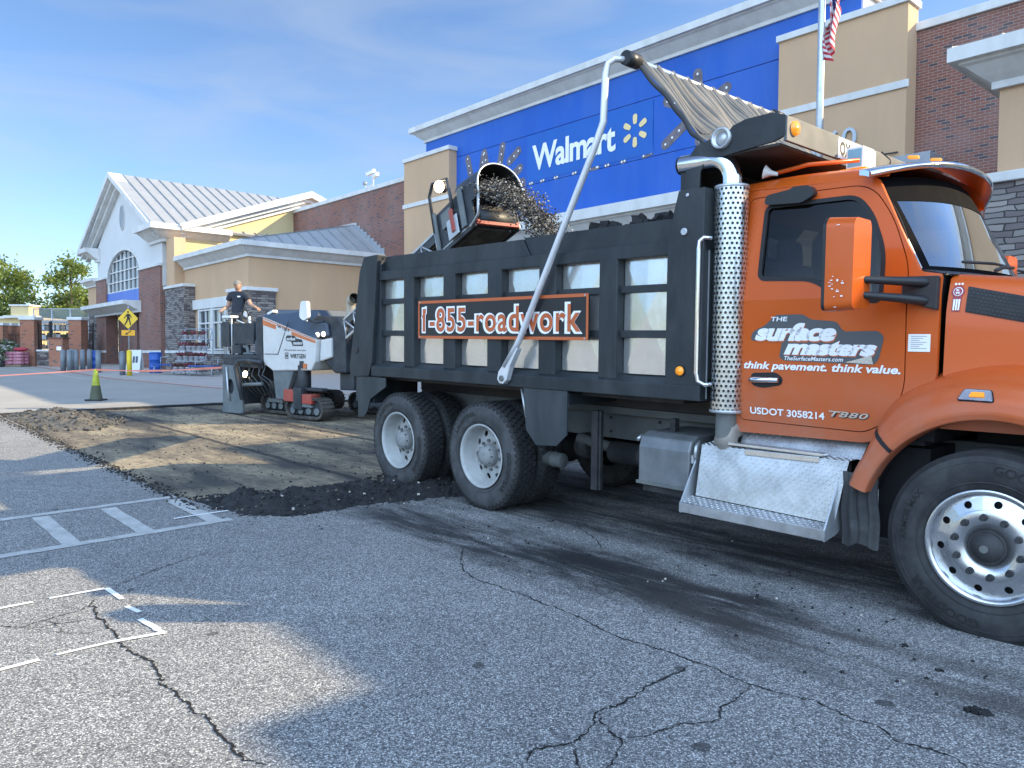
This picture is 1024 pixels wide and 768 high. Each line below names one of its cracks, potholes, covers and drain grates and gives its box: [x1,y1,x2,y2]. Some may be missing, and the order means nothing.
crack [460,550,987,768]
crack [0,600,266,765]
